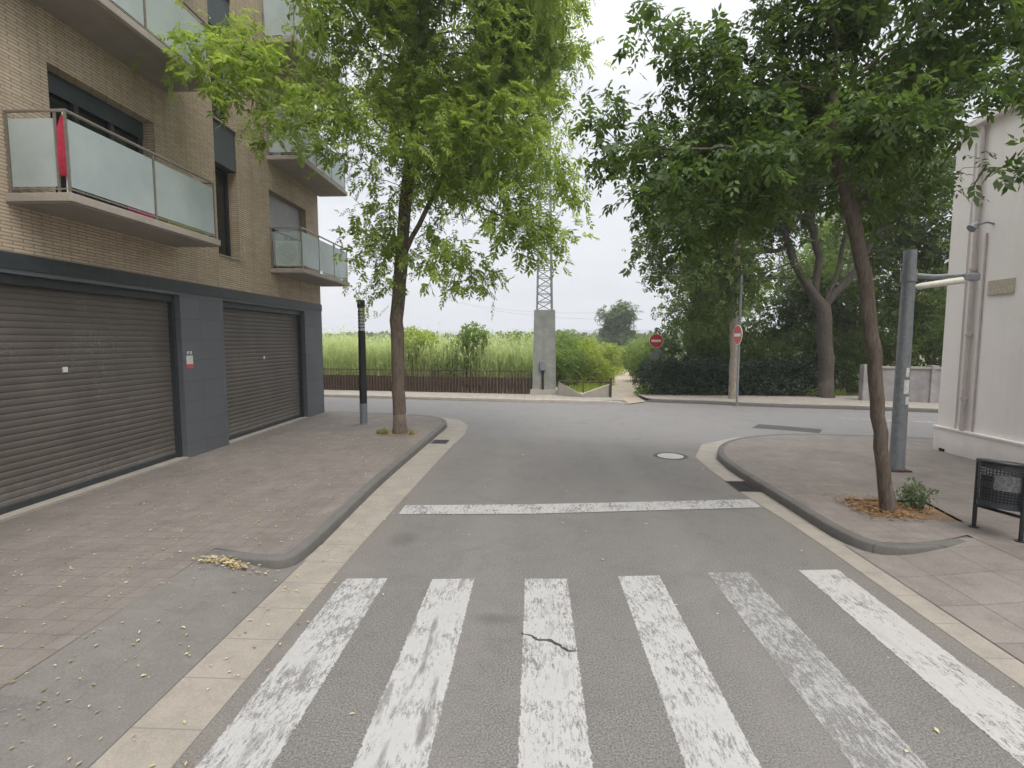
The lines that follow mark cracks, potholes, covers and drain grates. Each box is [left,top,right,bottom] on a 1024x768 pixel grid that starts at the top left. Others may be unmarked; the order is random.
crack [521,633,579,652]
manhole cover [653,452,688,460]
